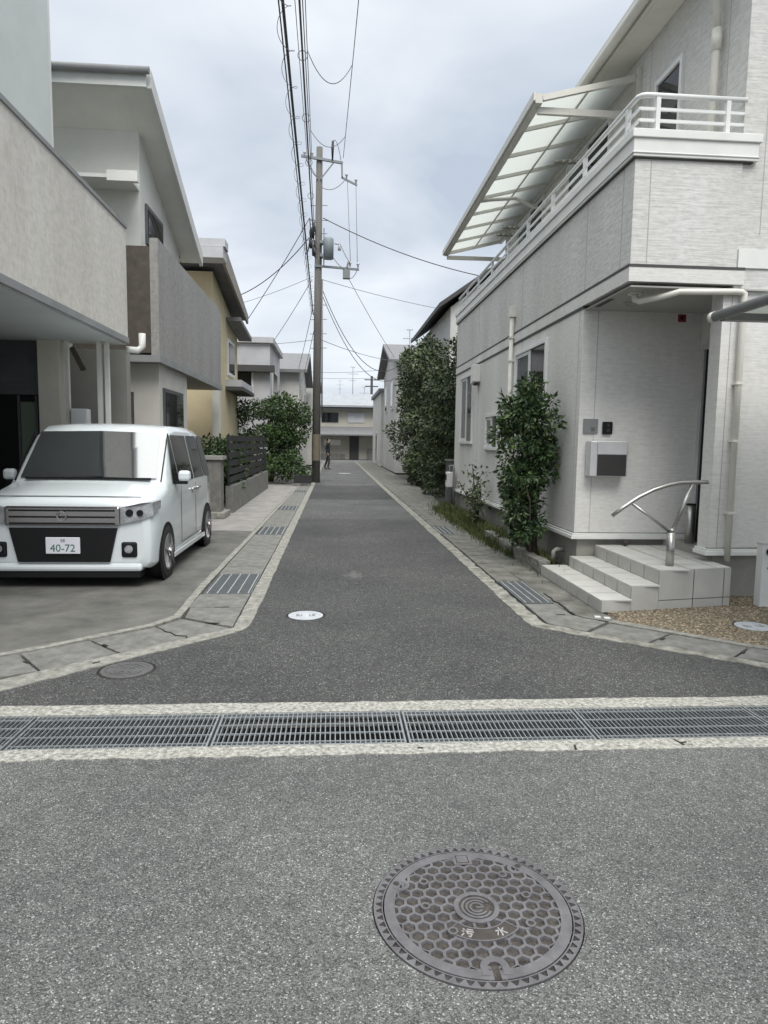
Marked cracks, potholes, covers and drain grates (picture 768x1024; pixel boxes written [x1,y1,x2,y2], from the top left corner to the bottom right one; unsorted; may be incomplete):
manhole cover [286,611,325,621]
drain grate [257,527,287,535]
drain grate [0,716,37,751]
manhole cover [97,661,156,680]
drain grate [402,709,597,743]
drain grate [432,527,457,536]
manhole cover [373,847,584,991]
drain grate [742,706,768,724]
manhole cover [732,622,768,631]
drain grate [210,711,407,747]
drain grate [203,574,262,597]
drain grate [498,581,552,607]
